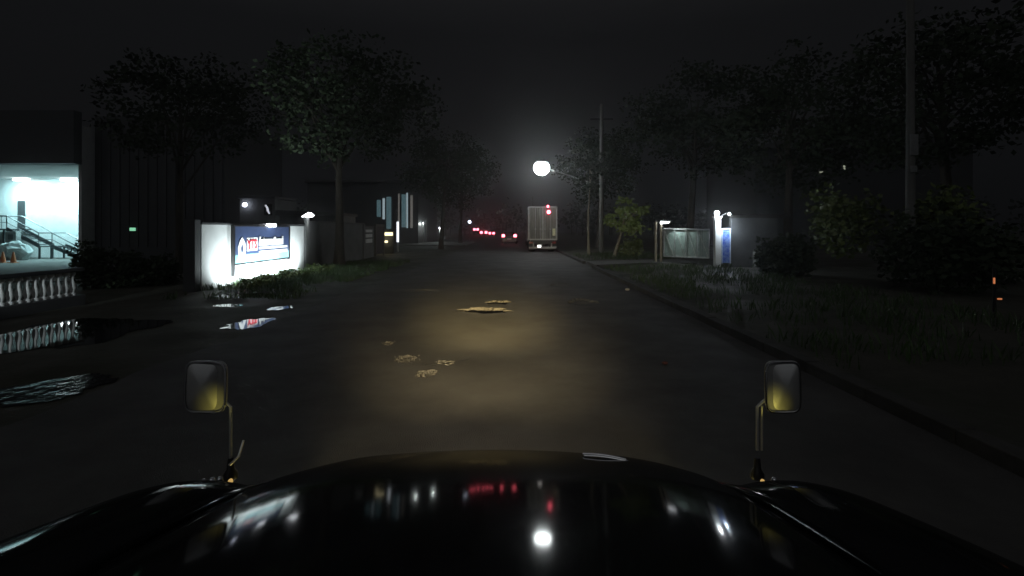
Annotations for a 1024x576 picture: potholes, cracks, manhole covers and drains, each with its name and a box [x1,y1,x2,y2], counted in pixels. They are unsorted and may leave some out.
pothole [394,355,421,363]
pothole [413,369,440,378]
